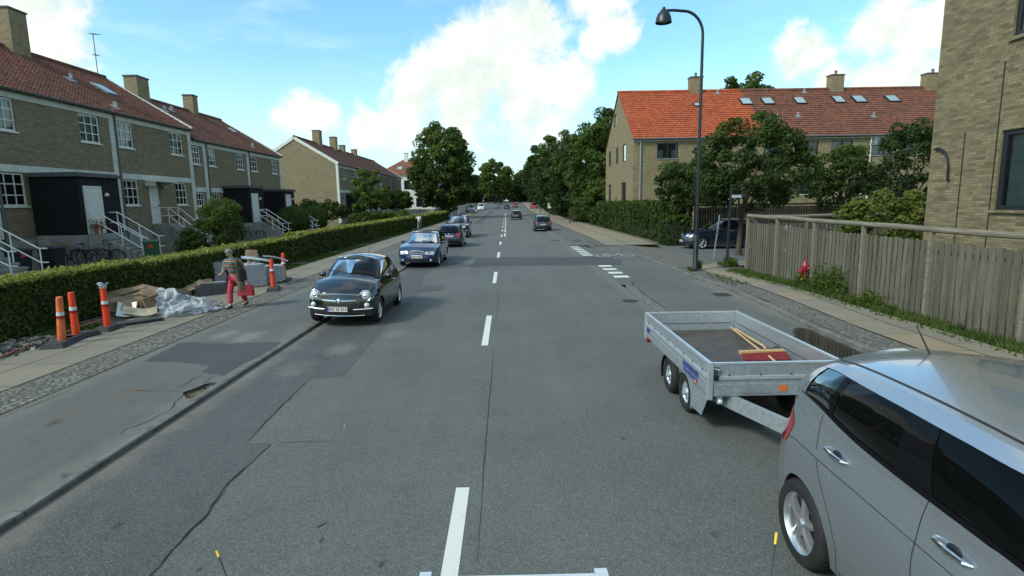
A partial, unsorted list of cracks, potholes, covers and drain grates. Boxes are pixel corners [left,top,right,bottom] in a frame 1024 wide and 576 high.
crack [120,376,215,435]
pothole [183,383,216,399]
crack [149,379,325,576]
